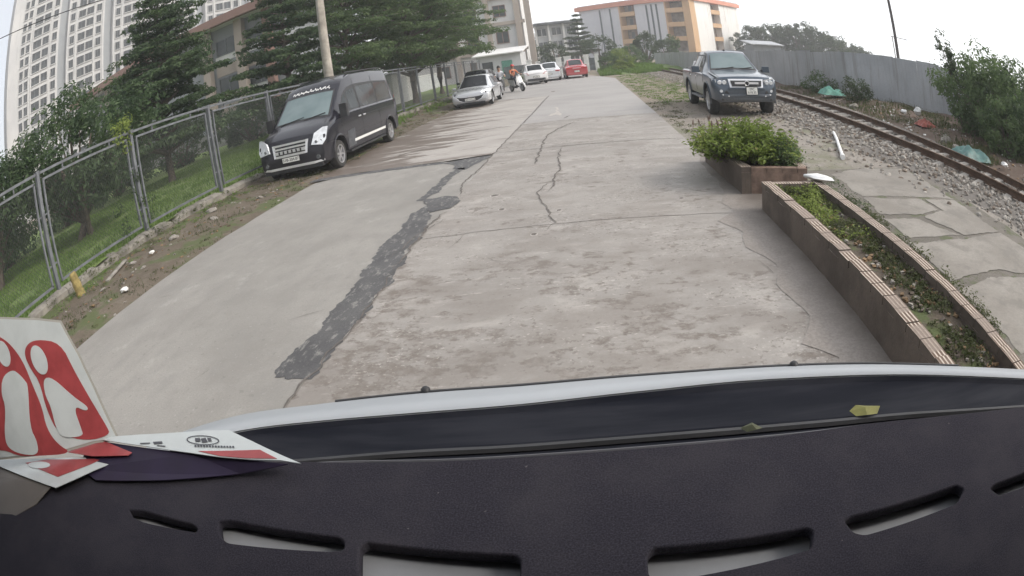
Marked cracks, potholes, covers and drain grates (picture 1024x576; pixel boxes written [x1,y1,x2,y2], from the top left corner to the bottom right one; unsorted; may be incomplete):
crack [353,98,571,230]
